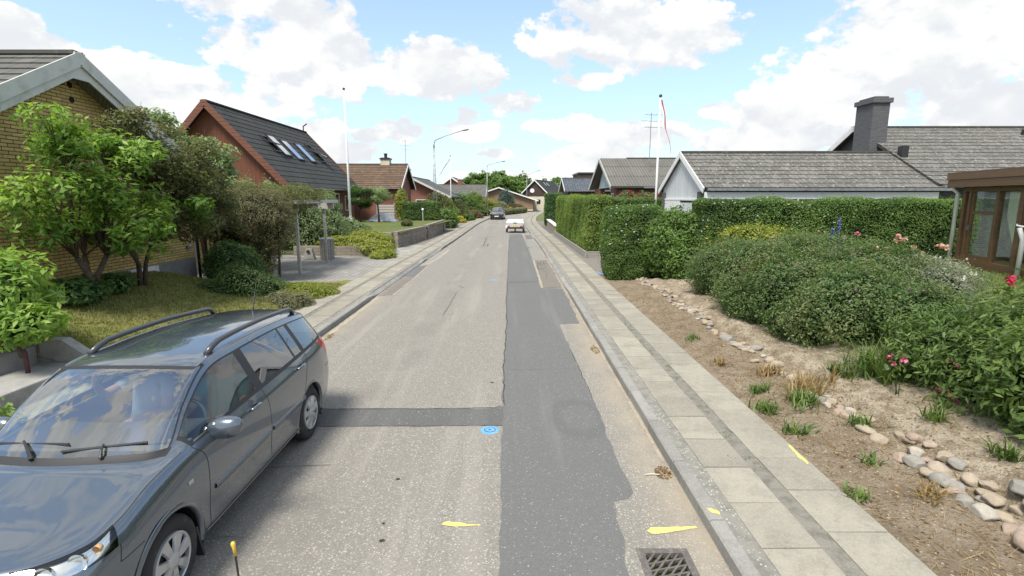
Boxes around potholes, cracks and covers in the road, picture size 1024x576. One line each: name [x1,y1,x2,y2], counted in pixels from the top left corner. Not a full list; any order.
drain grate [636,548,700,576]
